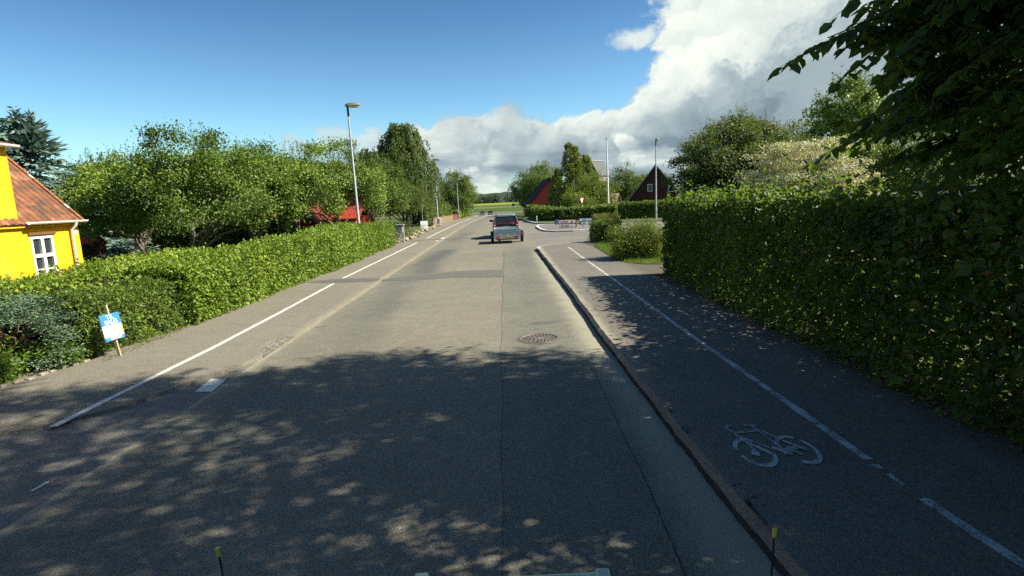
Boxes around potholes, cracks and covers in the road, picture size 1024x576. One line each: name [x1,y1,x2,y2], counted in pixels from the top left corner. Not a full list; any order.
manhole cover [517,333,561,344]
